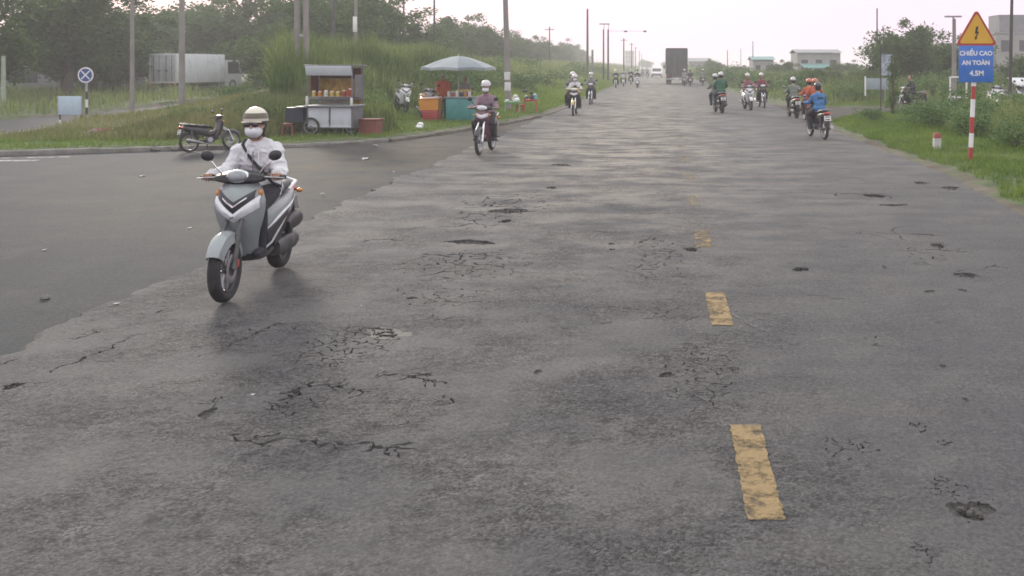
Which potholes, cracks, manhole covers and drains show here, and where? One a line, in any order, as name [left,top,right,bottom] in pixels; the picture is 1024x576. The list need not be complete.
crack [361,228,532,321]
crack [198,321,455,460]
crack [187,380,223,409]
crack [823,437,880,461]
crack [50,328,129,373]
pothole [929,497,1002,523]
